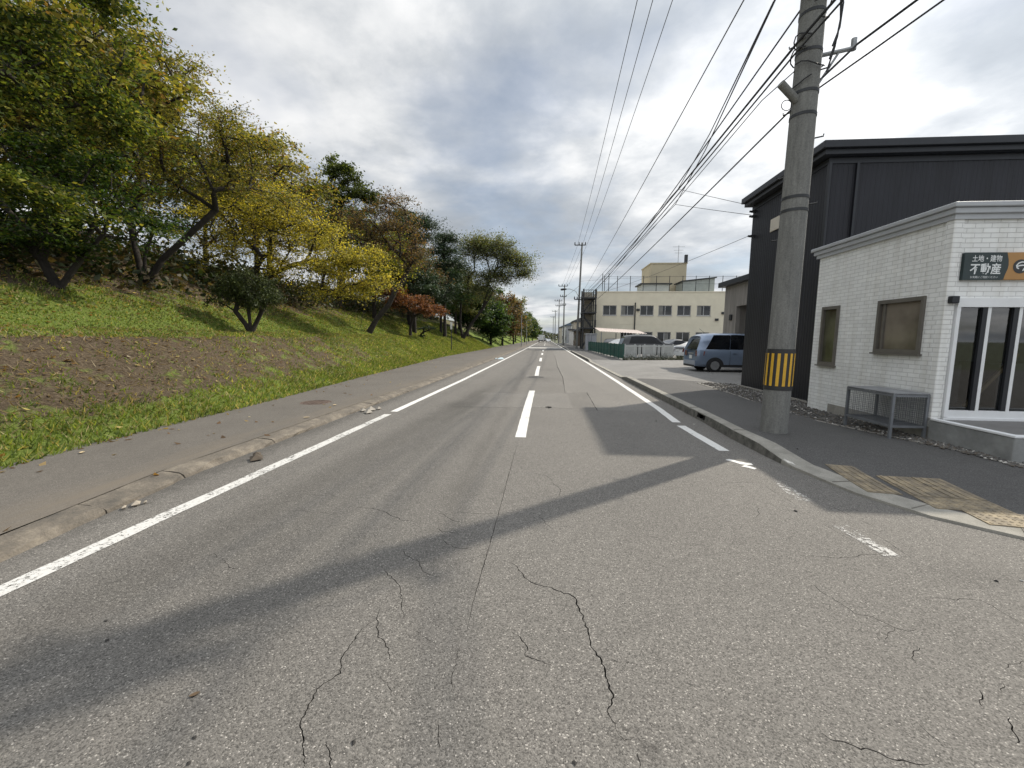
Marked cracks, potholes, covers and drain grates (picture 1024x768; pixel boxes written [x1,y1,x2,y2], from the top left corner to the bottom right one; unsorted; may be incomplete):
crack [819,732,928,765]
crack [299,552,437,768]
crack [509,562,645,768]
